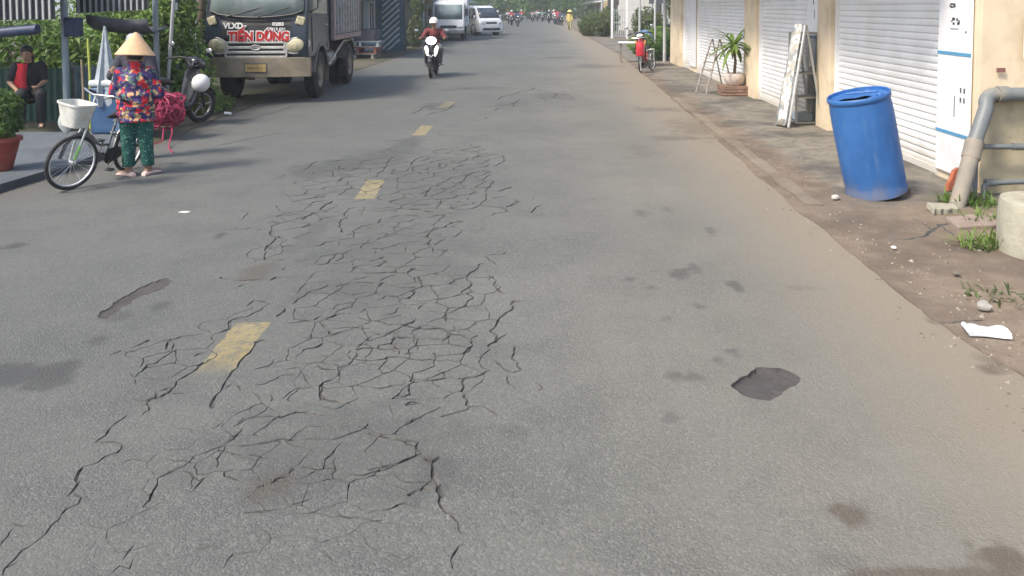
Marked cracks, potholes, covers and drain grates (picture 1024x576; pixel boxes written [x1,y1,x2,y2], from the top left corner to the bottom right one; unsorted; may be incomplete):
crack [485,88,576,119]
crack [887,219,978,241]
pothole [731,367,801,401]
crack [411,88,469,118]
crack [0,134,543,576]
